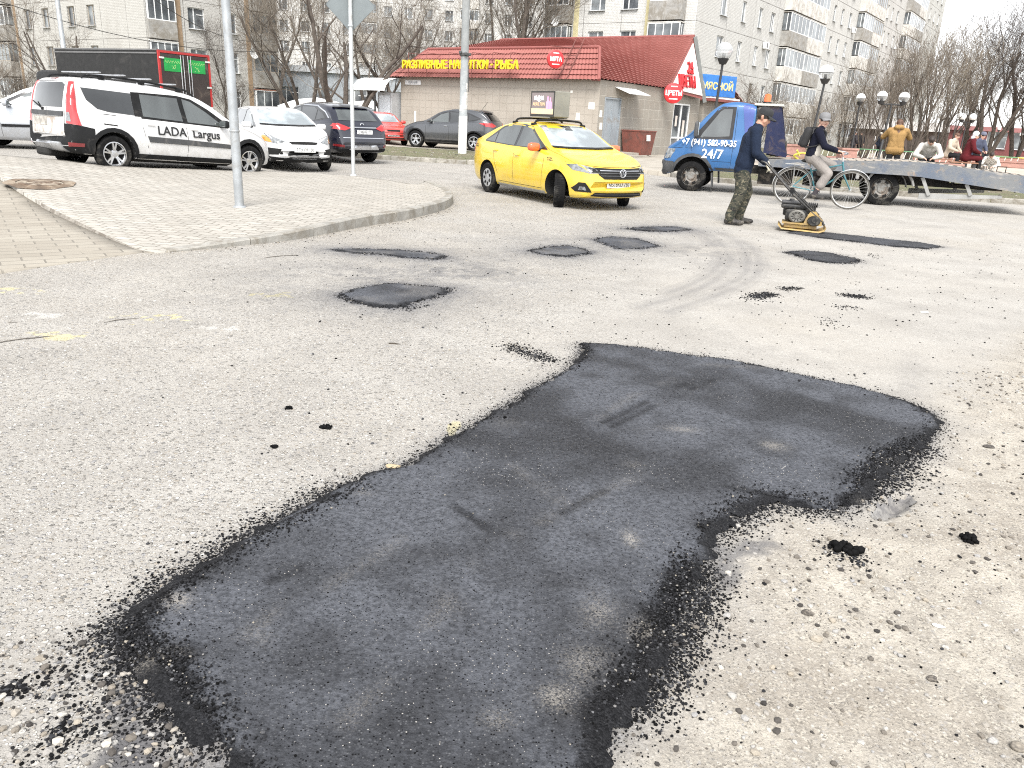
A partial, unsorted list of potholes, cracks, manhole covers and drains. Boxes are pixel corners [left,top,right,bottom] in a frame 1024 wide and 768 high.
manhole cover [2,179,76,190]
